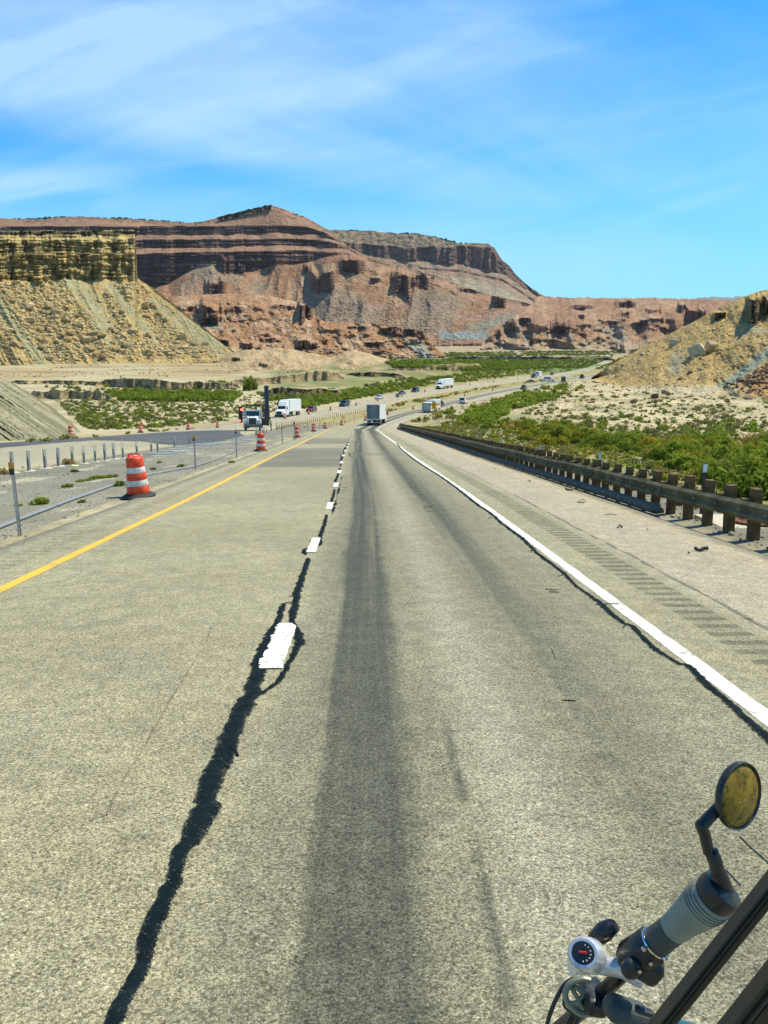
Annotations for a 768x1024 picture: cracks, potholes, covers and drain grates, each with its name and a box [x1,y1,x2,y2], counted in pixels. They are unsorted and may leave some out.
crack [107,626,212,815]
